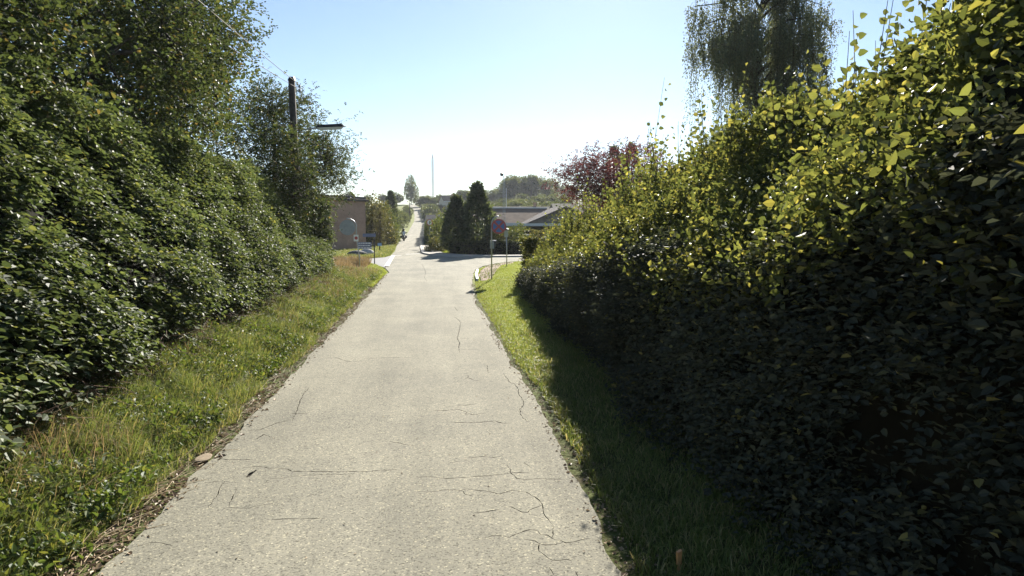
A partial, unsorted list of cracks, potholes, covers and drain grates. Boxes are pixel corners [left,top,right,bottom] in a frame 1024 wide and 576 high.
crack [208,481,321,520]
crack [422,456,584,576]
crack [225,459,395,479]
